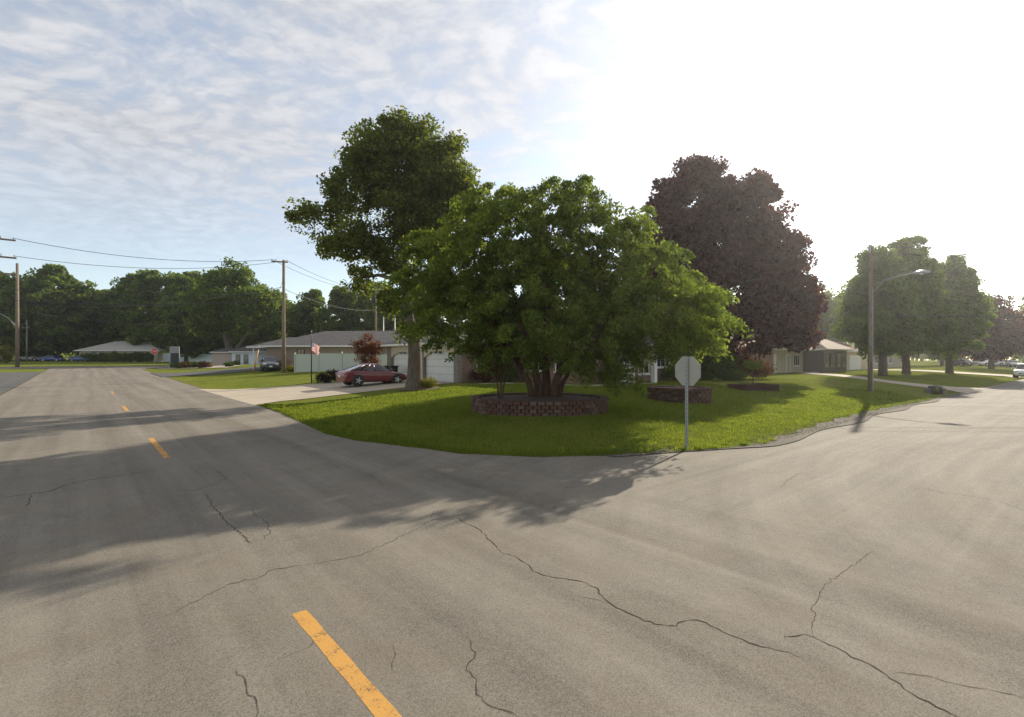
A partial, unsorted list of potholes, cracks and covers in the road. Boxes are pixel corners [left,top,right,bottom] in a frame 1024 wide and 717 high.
crack [161,518,1017,717]
